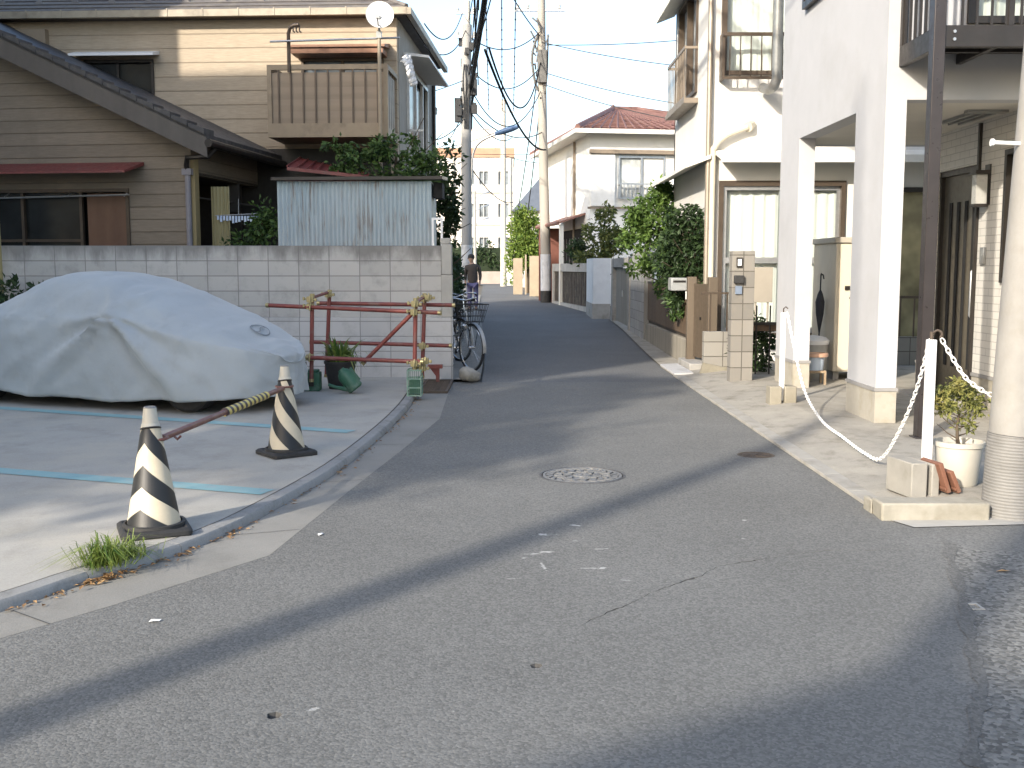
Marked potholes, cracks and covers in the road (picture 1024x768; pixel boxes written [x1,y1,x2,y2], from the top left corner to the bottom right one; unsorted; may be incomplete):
crack [582,550,942,625]
manhole cover [539,467,626,484]
